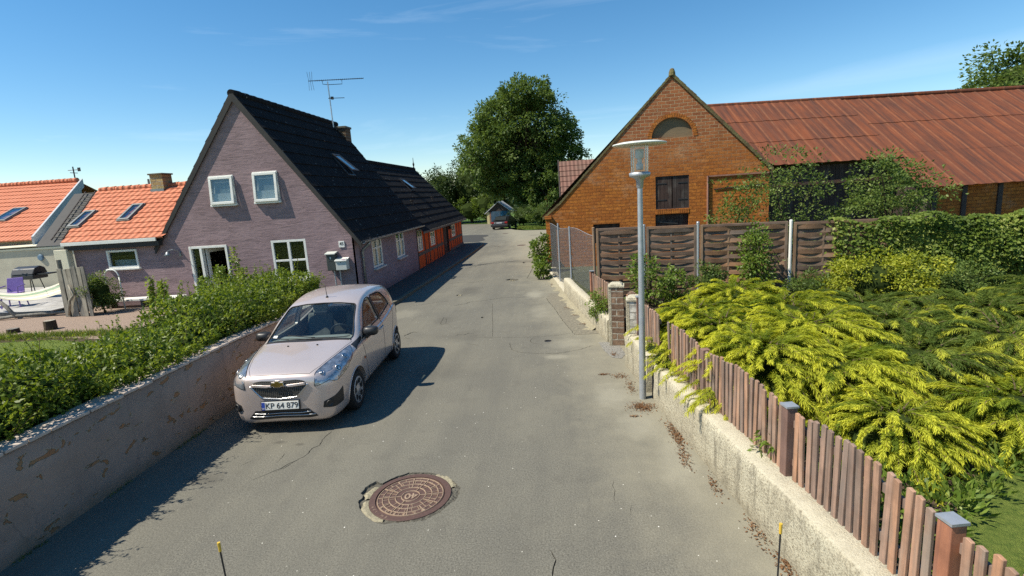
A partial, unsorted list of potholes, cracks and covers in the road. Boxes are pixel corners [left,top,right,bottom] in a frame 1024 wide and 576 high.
manhole cover [369,474,451,522]
